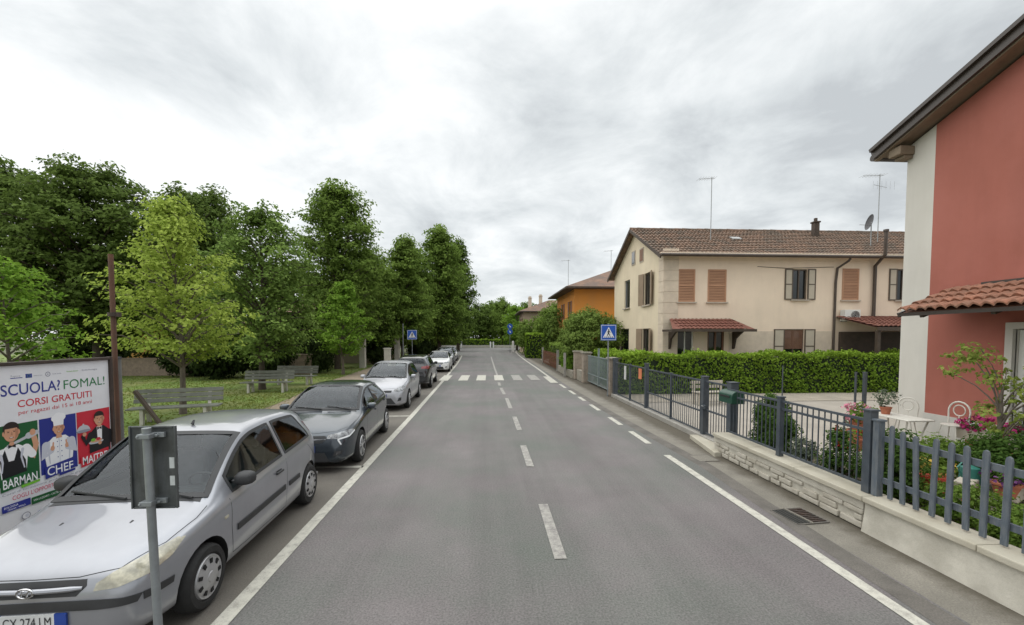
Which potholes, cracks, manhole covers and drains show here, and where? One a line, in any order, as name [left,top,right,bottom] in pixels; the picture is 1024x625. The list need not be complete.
drain grate [770,507,830,525]
